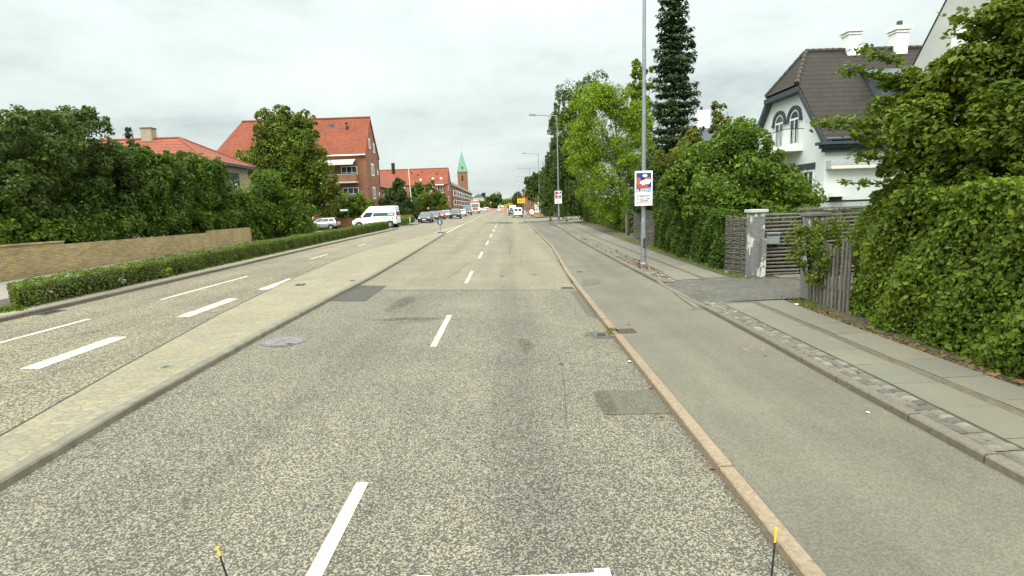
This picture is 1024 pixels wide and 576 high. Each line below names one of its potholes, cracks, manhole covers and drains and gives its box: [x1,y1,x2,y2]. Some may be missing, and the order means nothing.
manhole cover [261,336,306,346]
